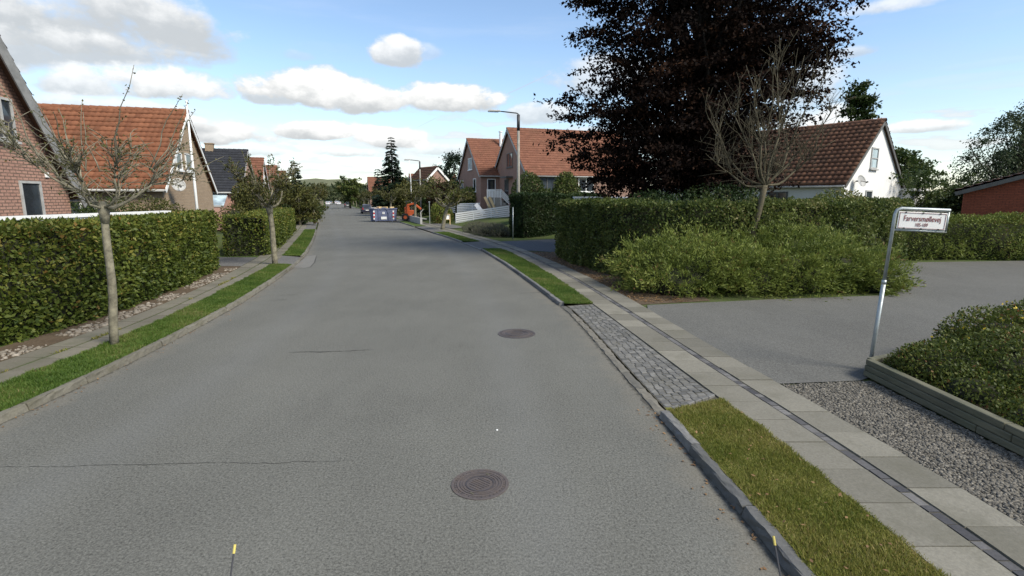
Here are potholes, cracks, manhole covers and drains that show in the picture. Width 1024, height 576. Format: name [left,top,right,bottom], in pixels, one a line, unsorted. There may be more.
manhole cover [498,329,535,339]
manhole cover [451,469,509,500]
